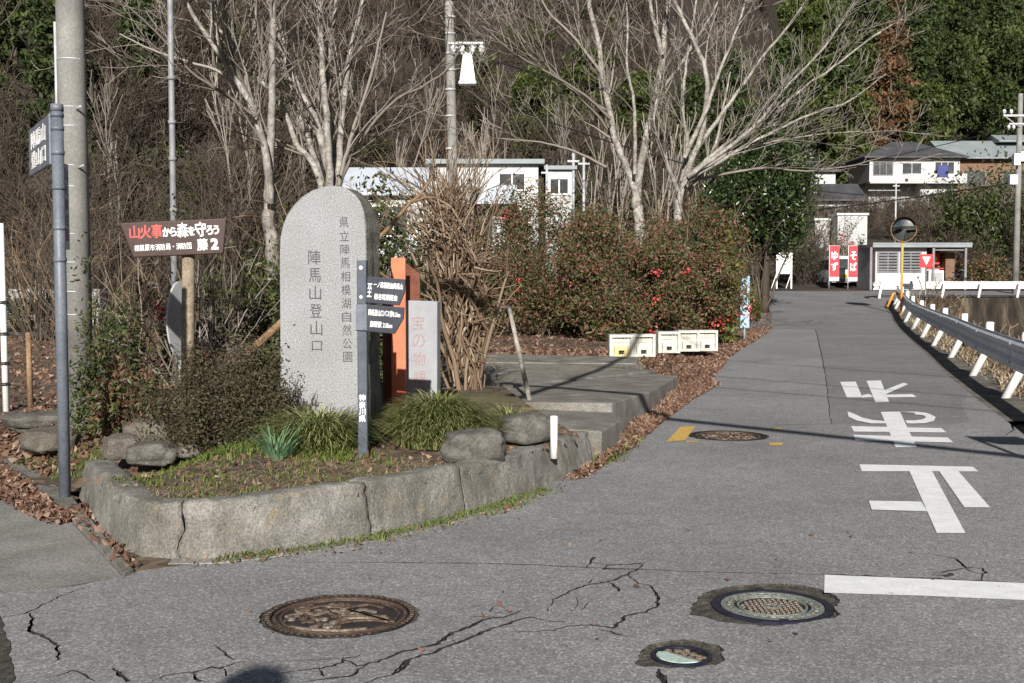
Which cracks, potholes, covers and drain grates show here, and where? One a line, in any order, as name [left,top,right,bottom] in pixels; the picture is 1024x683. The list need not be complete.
crack [292,563,660,683]
manhole cover [689,584,840,626]
manhole cover [259,594,420,639]
crack [823,553,1012,583]
manhole cover [689,430,769,441]
crack [6,588,95,681]
crack [112,668,130,682]
manhole cover [635,639,725,675]
